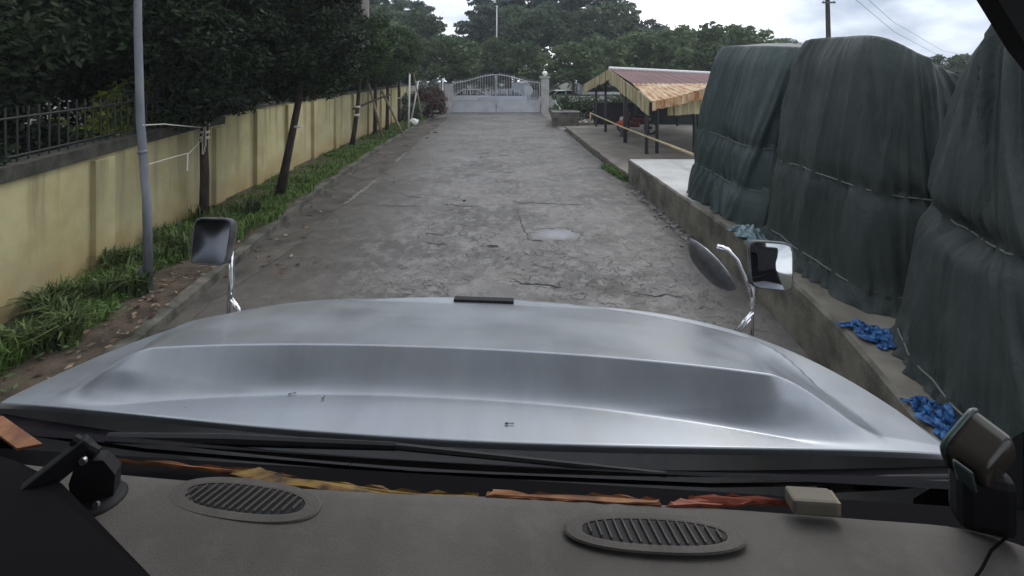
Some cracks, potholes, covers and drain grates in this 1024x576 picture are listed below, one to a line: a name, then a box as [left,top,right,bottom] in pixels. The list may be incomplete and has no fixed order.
crack [391,146,713,309]
